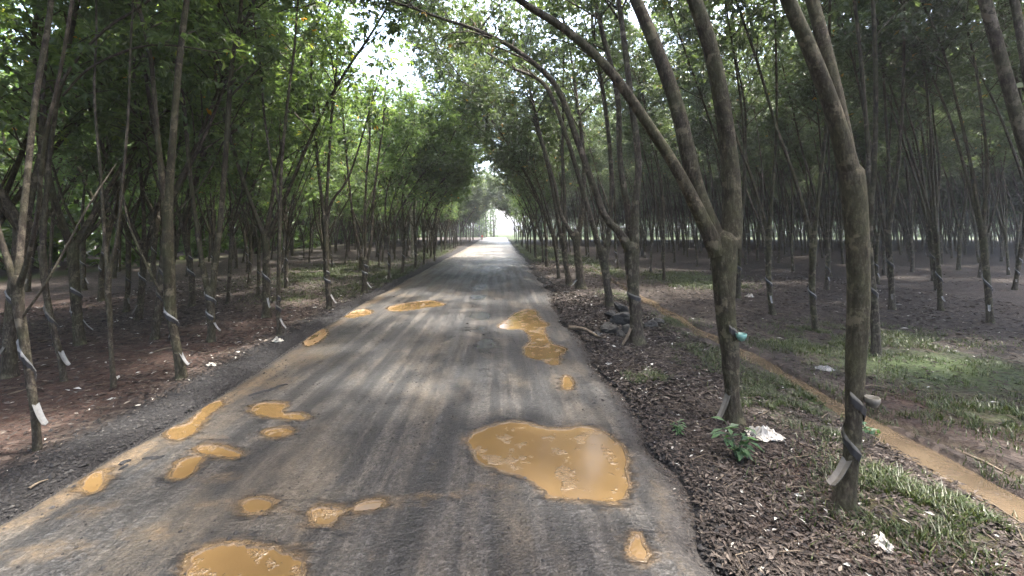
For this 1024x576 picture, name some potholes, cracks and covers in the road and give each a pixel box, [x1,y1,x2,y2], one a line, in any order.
pothole [82,471,104,492]
pothole [629,534,648,560]
pothole [264,427,293,437]
pothole [499,309,566,365]
pothole [346,309,371,318]
pothole [242,498,272,512]
pothole [388,300,444,311]
pothole [303,329,328,346]
pothole [354,500,384,510]
pothole [468,422,629,501]
pothole [186,542,303,576]
pothole [251,402,307,419]
